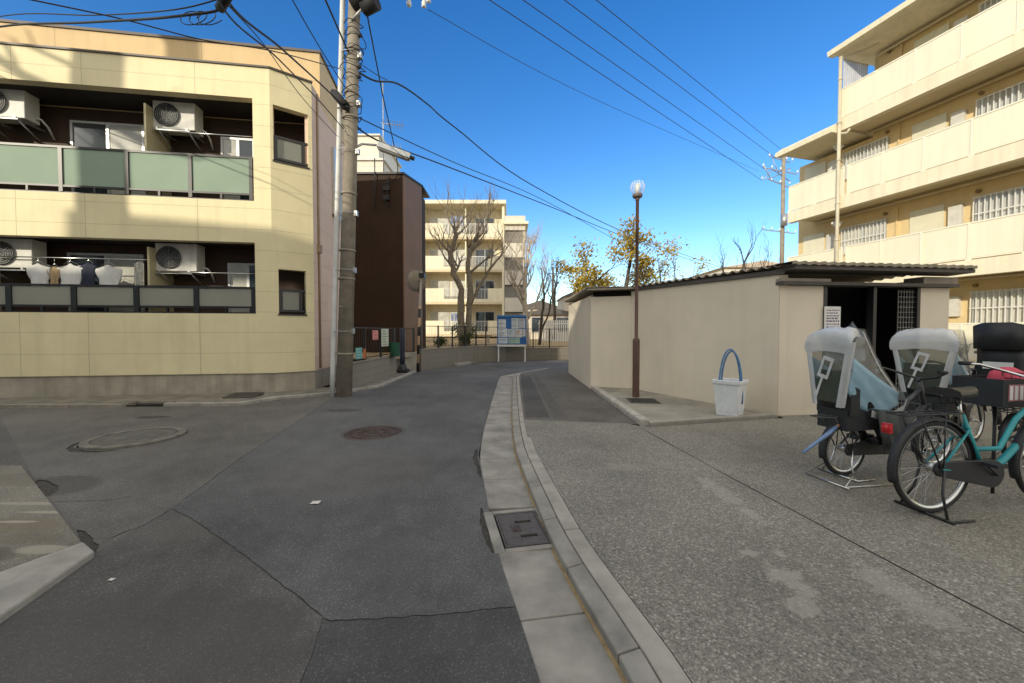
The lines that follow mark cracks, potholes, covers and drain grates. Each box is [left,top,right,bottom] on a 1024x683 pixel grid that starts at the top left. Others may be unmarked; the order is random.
manhole cover [340,425,405,441]
pothole [77,530,99,553]
pothole [480,508,494,553]
pothole [35,480,59,496]
manhole cover [78,427,187,451]
